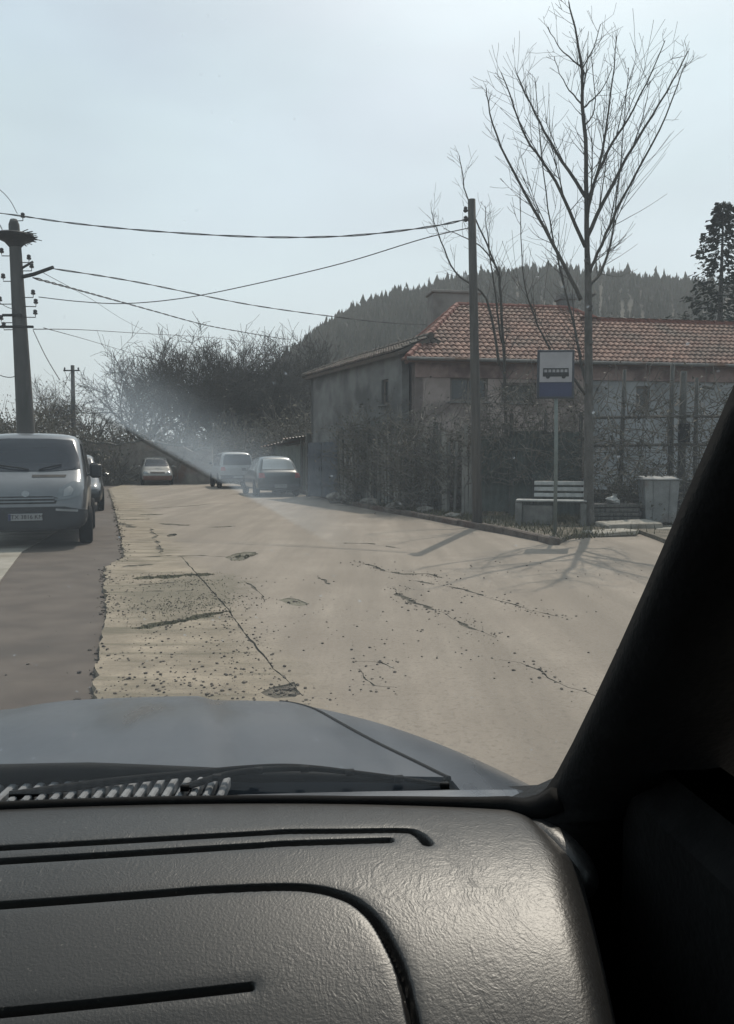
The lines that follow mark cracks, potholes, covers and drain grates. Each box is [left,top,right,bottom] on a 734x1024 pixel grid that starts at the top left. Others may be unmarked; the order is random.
crack [117,514,302,695]
crack [499,659,595,696]
crack [322,543,558,638]
pothole [280,598,308,606]
pothole [225,552,258,561]
pothole [261,682,299,698]
